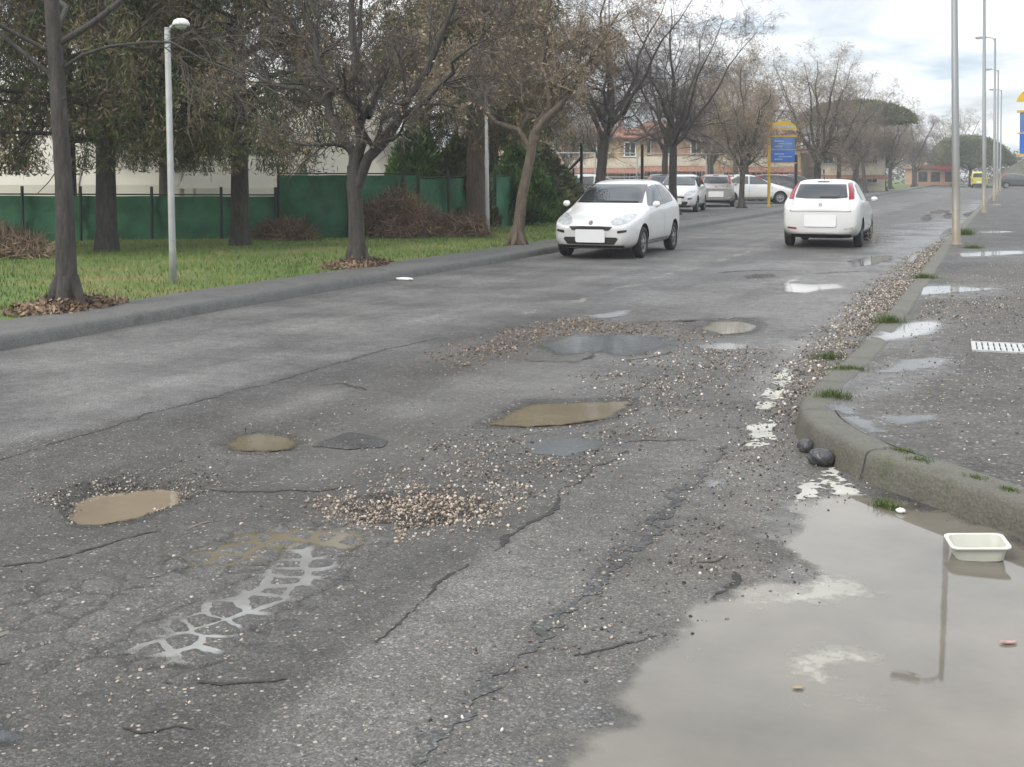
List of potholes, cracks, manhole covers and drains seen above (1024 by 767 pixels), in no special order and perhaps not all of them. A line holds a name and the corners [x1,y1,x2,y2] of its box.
pothole [41,472,216,534]
pothole [201,427,321,458]
drain grate [971,341,1024,354]
crack [0,516,469,694]
pothole [670,317,773,338]
crack [412,439,742,767]
pothole [459,396,654,432]
